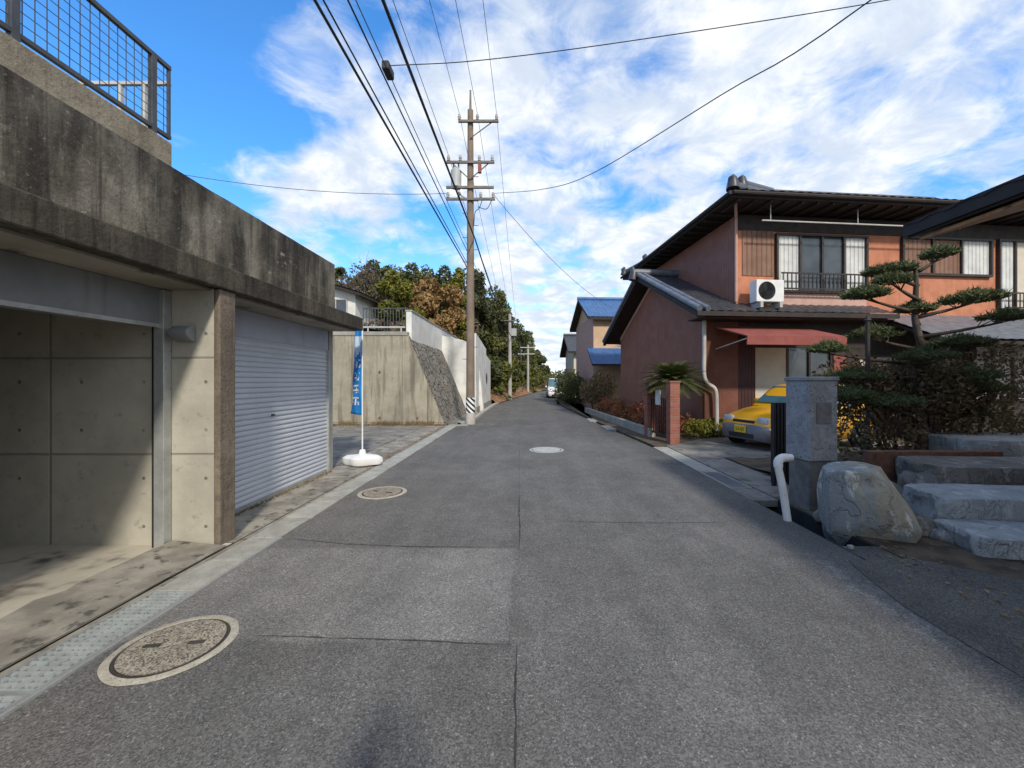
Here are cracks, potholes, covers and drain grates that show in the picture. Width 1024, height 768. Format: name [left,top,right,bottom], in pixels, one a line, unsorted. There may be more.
manhole cover [97,615,239,686]
manhole cover [357,486,407,499]
